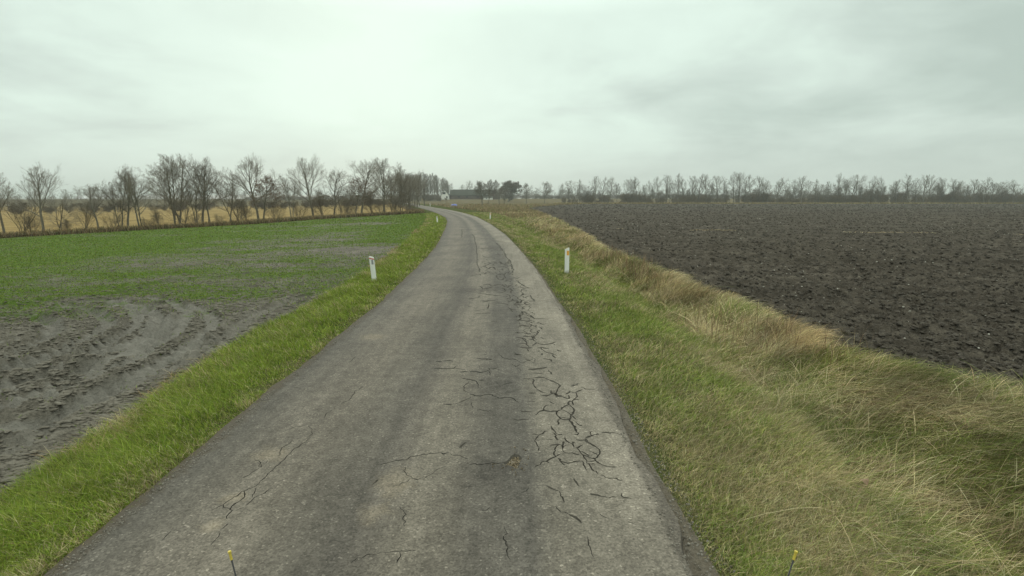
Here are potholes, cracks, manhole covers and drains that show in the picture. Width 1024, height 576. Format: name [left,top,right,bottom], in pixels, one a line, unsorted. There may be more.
crack [372,442,504,485]
pothole [492,447,529,475]
crack [161,387,362,546]
crack [434,229,632,557]
